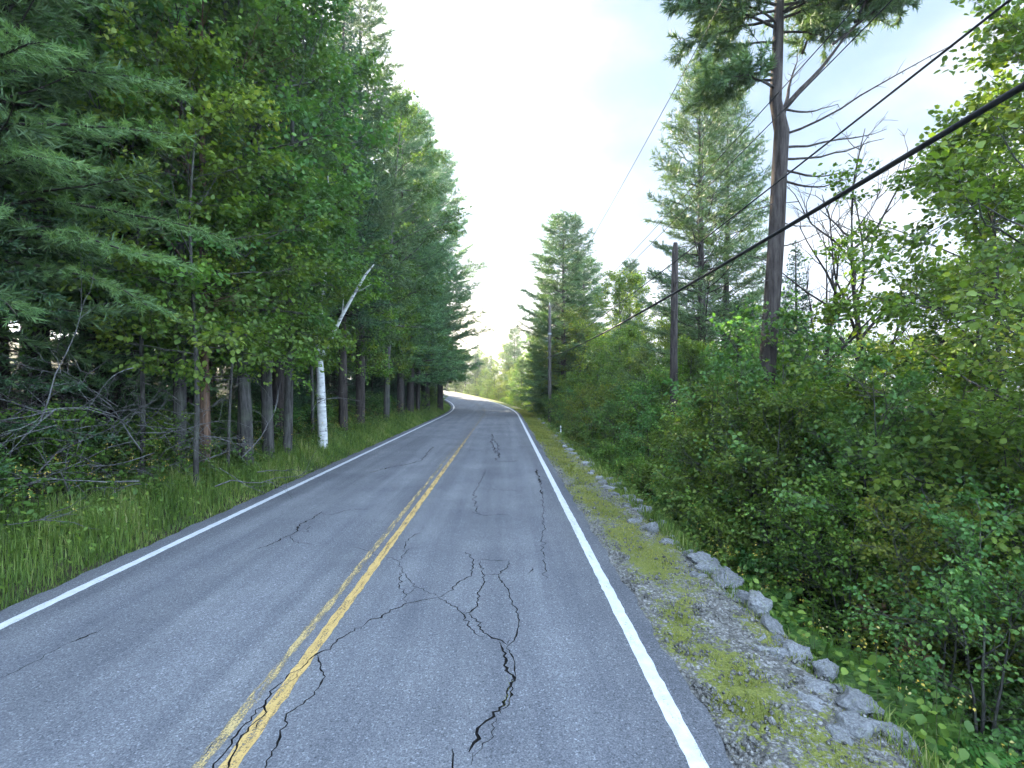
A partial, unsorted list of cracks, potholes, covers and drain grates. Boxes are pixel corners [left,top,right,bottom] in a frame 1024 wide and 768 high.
crack [527,470,547,579]
crack [258,509,364,549]
crack [472,434,506,516]
crack [206,533,520,768]
